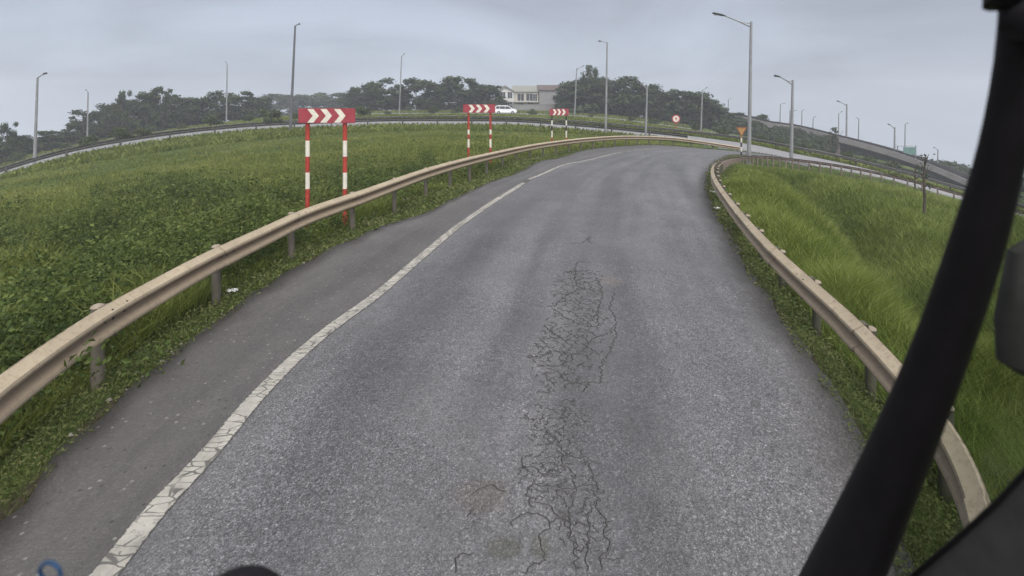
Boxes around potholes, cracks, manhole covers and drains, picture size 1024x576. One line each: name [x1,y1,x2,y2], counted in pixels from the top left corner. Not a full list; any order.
crack [474,261,619,575]
crack [454,552,474,573]
